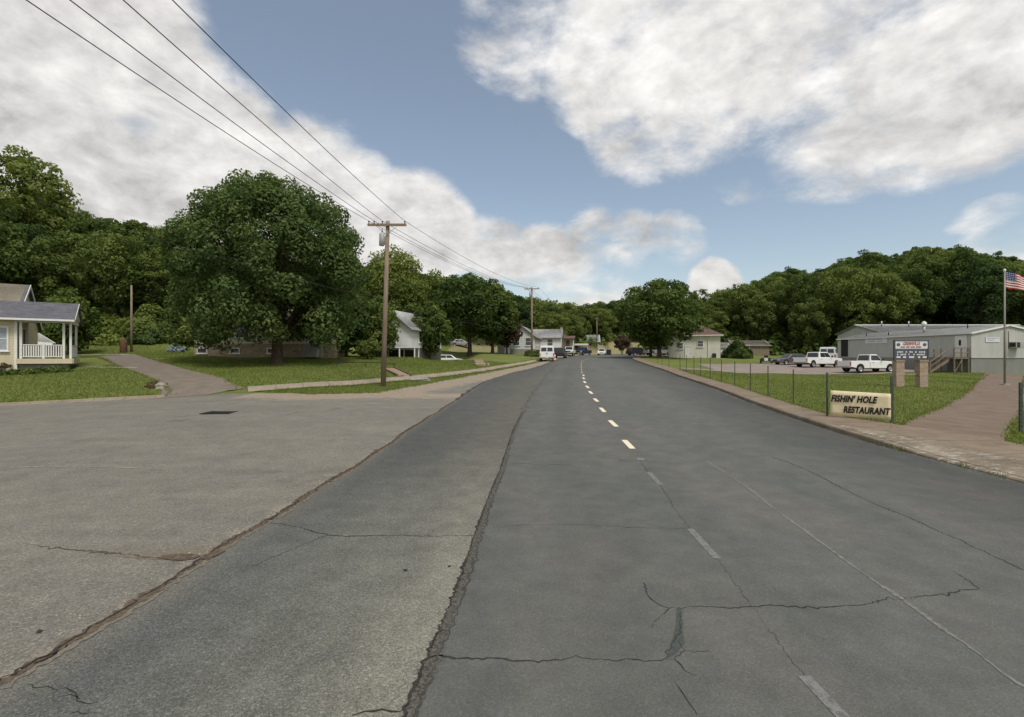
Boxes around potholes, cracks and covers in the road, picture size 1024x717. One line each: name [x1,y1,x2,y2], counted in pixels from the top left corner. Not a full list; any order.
crack [0,402,979,717]
